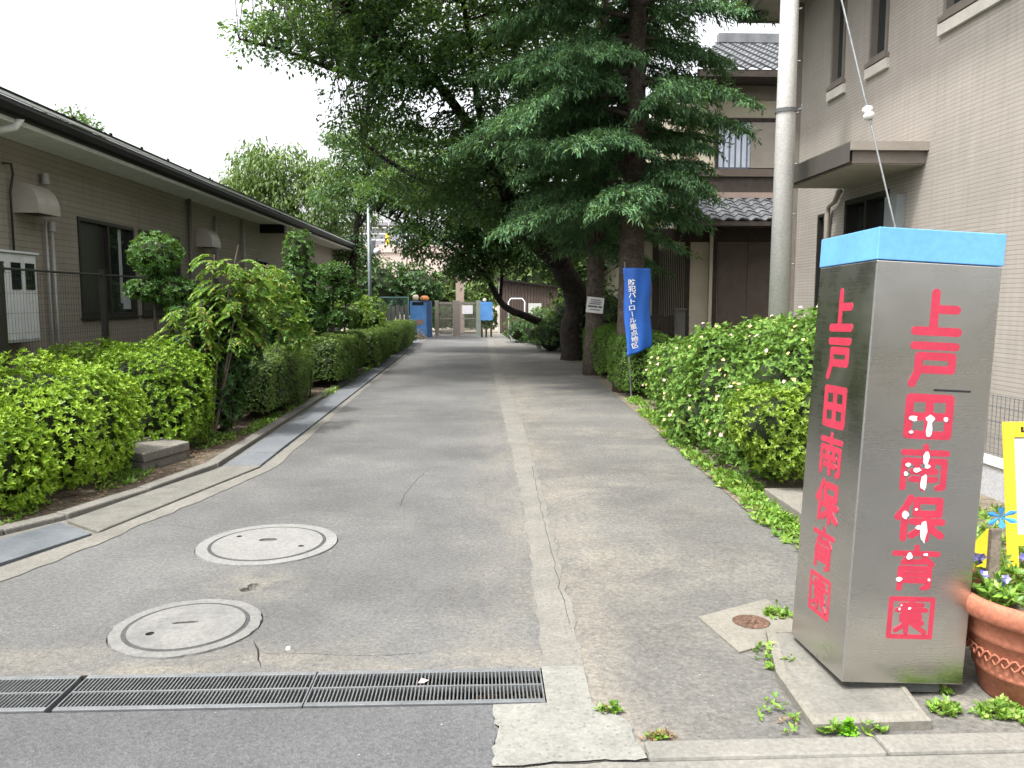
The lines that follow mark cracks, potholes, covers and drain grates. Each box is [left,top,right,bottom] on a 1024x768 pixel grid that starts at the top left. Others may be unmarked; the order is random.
crack [253,640,429,666]
manhole cover [195,524,338,567]
manhole cover [107,599,263,659]
drain grate [52,671,317,712]
crack [532,468,570,623]
drain grate [303,668,546,708]
drain grate [0,675,82,713]
